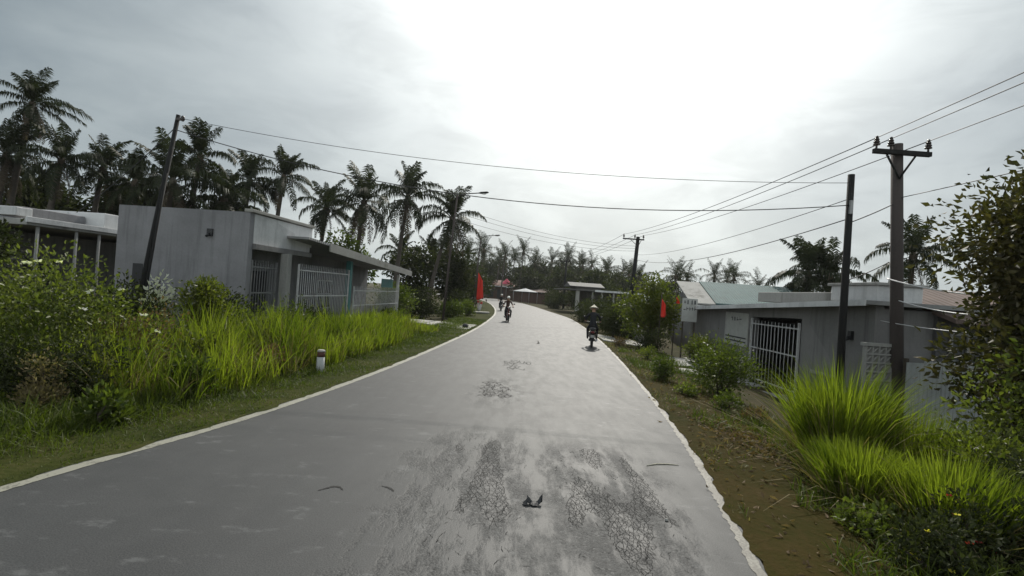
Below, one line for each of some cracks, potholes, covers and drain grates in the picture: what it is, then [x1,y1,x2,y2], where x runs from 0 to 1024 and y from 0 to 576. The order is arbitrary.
crack [479,360,531,398]
crack [423,438,525,566]
crack [551,448,699,576]
